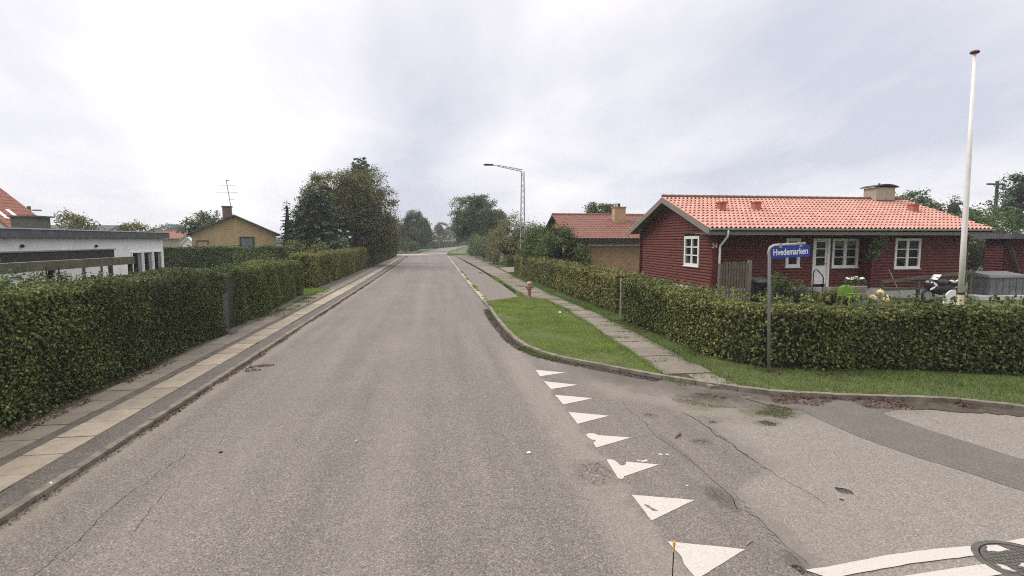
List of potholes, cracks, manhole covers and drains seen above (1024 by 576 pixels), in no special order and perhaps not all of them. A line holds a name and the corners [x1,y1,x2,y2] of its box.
manhole cover [971,540,1024,576]
crack [681,412,829,507]
pothole [578,462,613,485]
crack [33,451,187,576]
